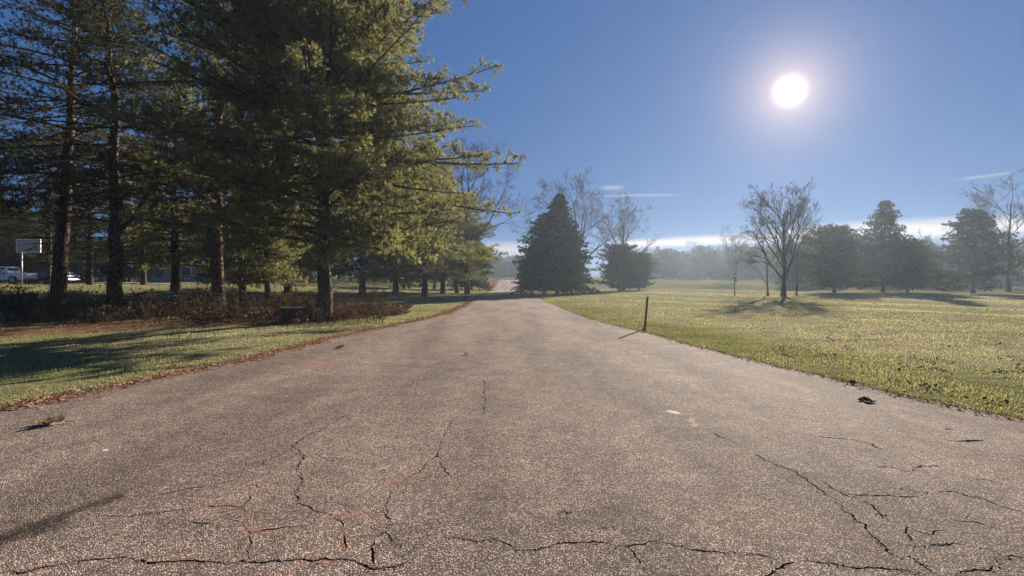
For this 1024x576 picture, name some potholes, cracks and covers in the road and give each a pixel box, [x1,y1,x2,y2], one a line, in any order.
crack [4,415,453,575]
crack [942,428,983,442]
crack [449,436,1024,576]
